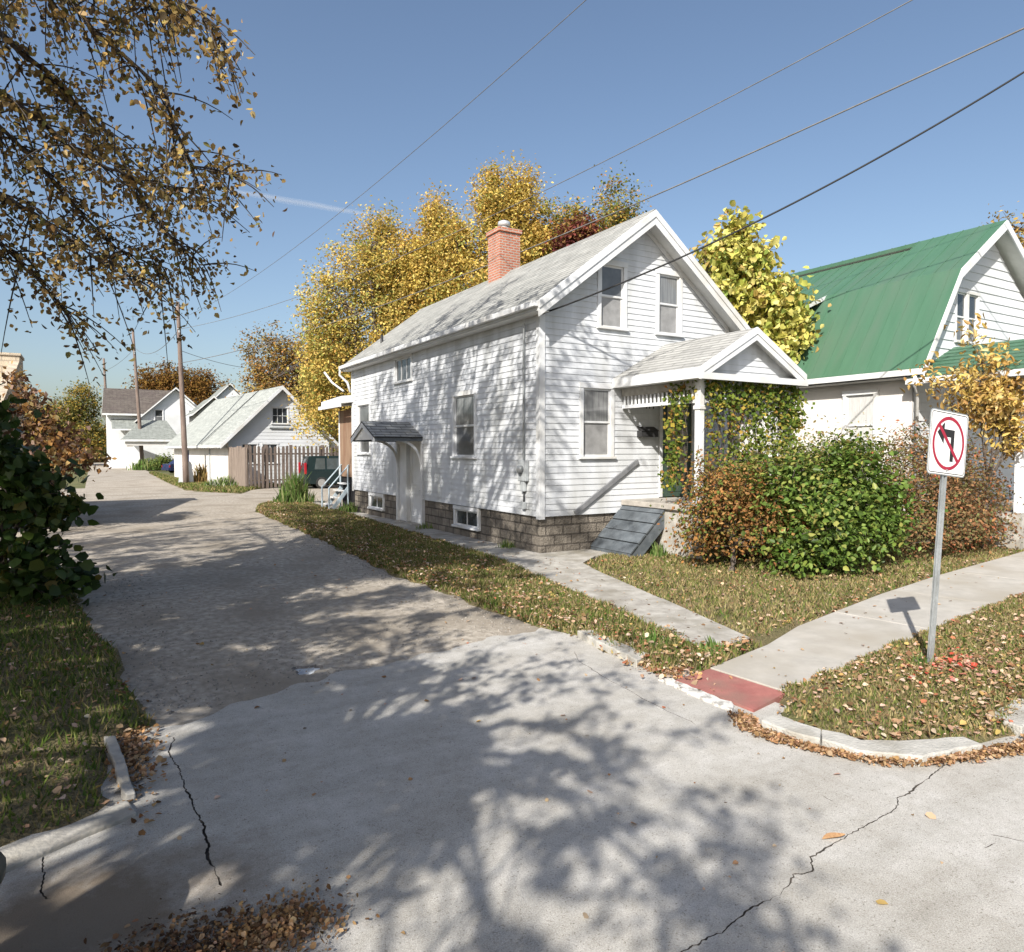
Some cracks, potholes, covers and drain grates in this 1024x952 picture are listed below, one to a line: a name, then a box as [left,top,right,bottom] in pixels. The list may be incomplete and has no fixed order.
crack [39,857,50,899]
crack [680,764,948,952]
crack [168,736,222,886]
